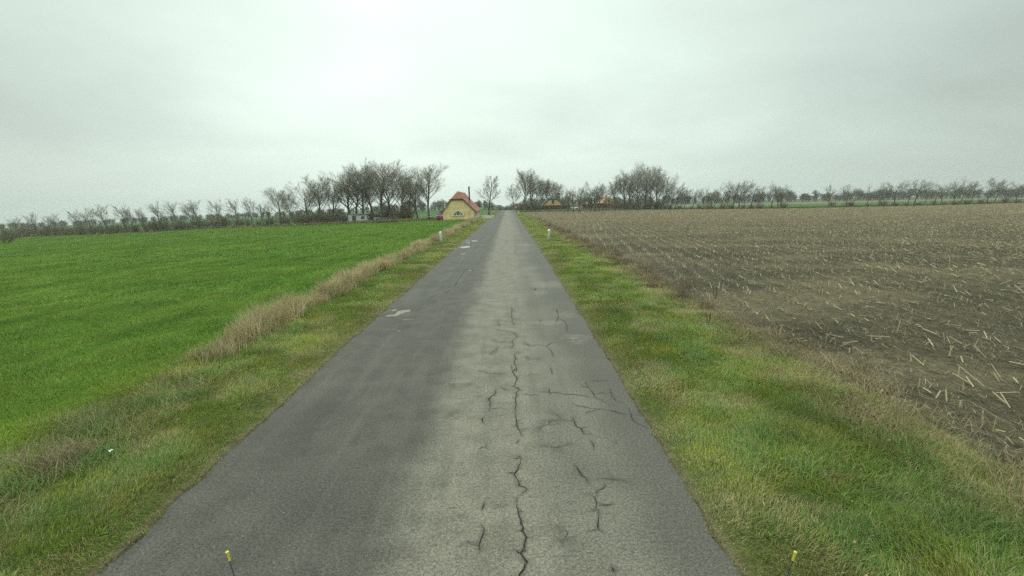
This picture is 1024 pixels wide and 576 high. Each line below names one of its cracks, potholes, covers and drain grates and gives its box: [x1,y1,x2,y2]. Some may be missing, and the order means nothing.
crack [575,465,628,532]
crack [542,386,646,448]
crack [481,312,553,576]
